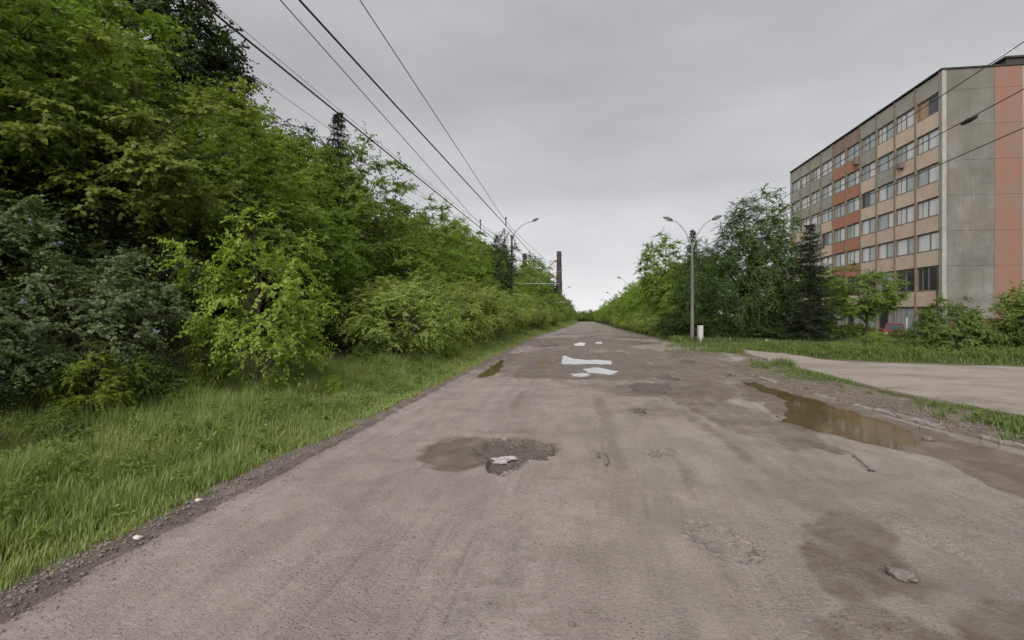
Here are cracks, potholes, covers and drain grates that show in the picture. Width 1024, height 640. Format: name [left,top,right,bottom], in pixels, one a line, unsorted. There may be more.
pothole [465,436,562,477]
pothole [626,381,677,396]
crack [794,438,875,472]
crack [591,449,613,465]
pothole [628,405,652,415]
